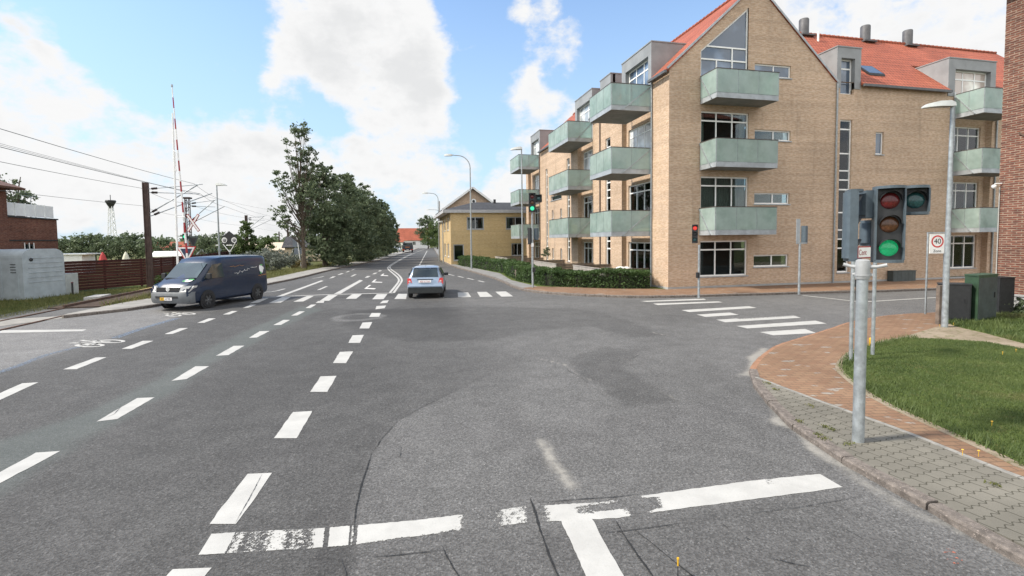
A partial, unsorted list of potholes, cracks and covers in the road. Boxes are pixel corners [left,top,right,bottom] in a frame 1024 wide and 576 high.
crack [613,521,693,576]
